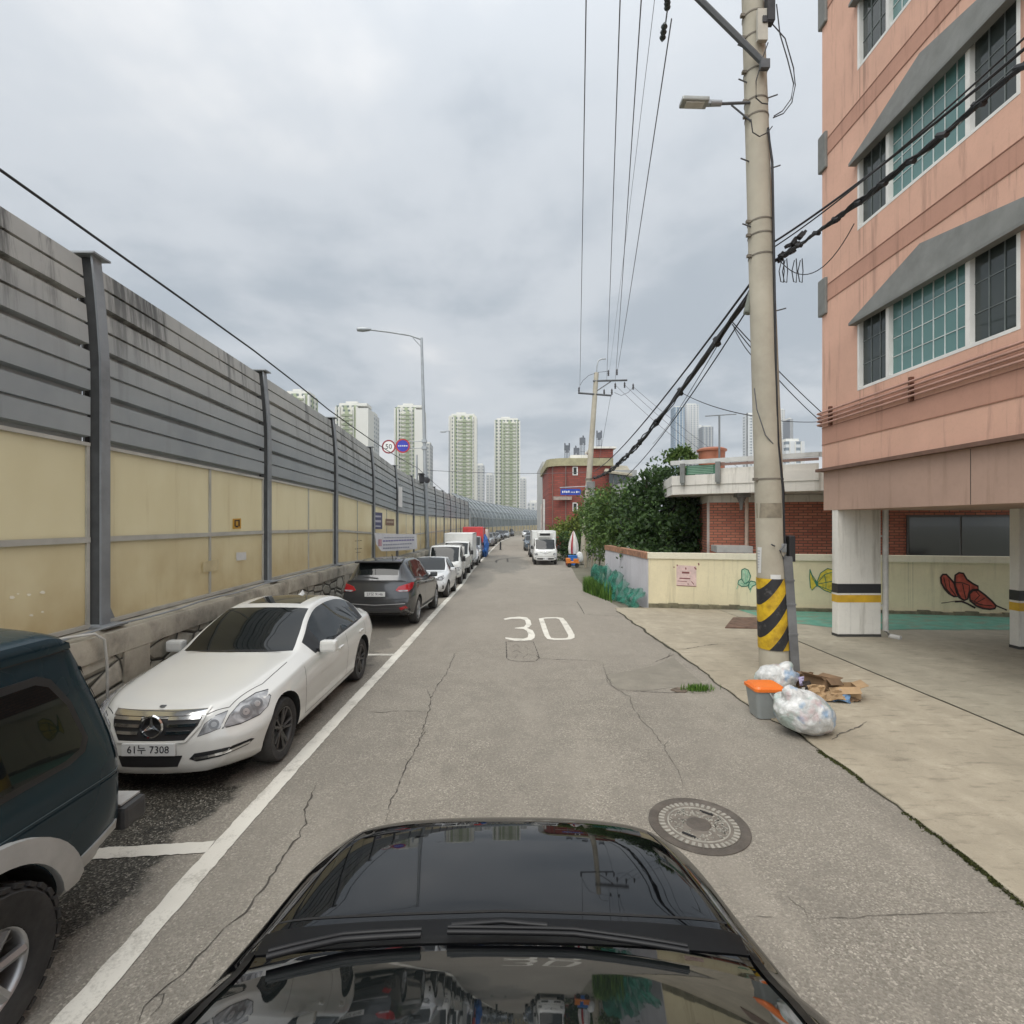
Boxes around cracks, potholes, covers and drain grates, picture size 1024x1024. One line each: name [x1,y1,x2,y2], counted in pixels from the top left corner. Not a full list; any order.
crack [509,602,1024,918]
crack [386,656,455,819]
manhole cover [648,798,752,856]
crack [139,785,316,1019]
